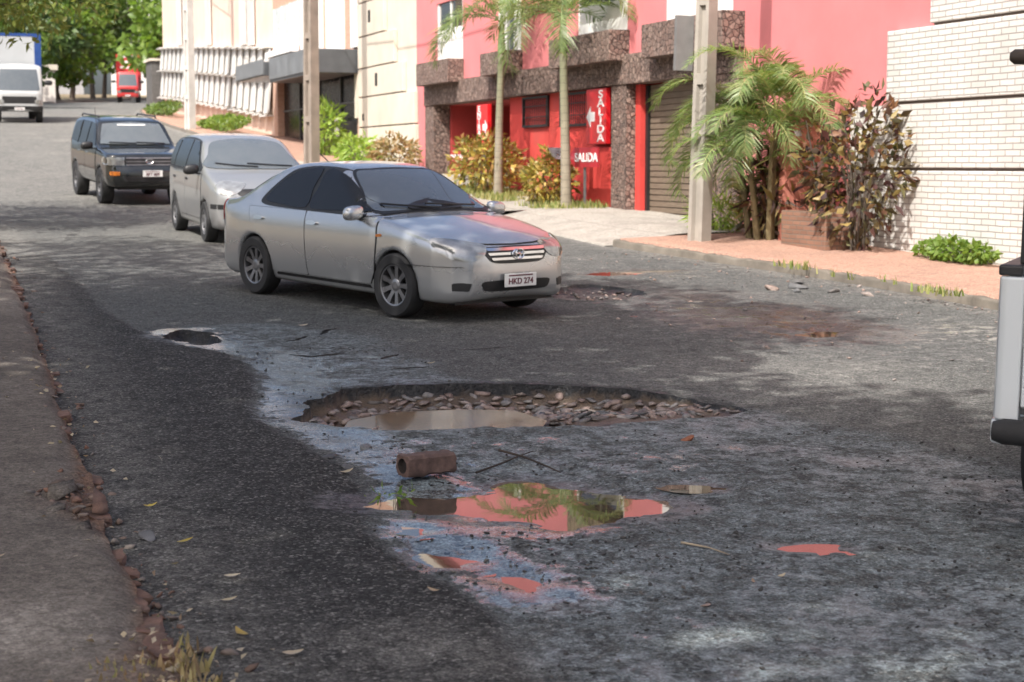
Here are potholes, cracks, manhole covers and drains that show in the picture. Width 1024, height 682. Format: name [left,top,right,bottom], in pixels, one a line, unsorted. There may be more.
pothole [403,481,666,526]
pothole [162,330,222,345]
pothole [291,383,748,430]
pothole [552,284,648,301]
